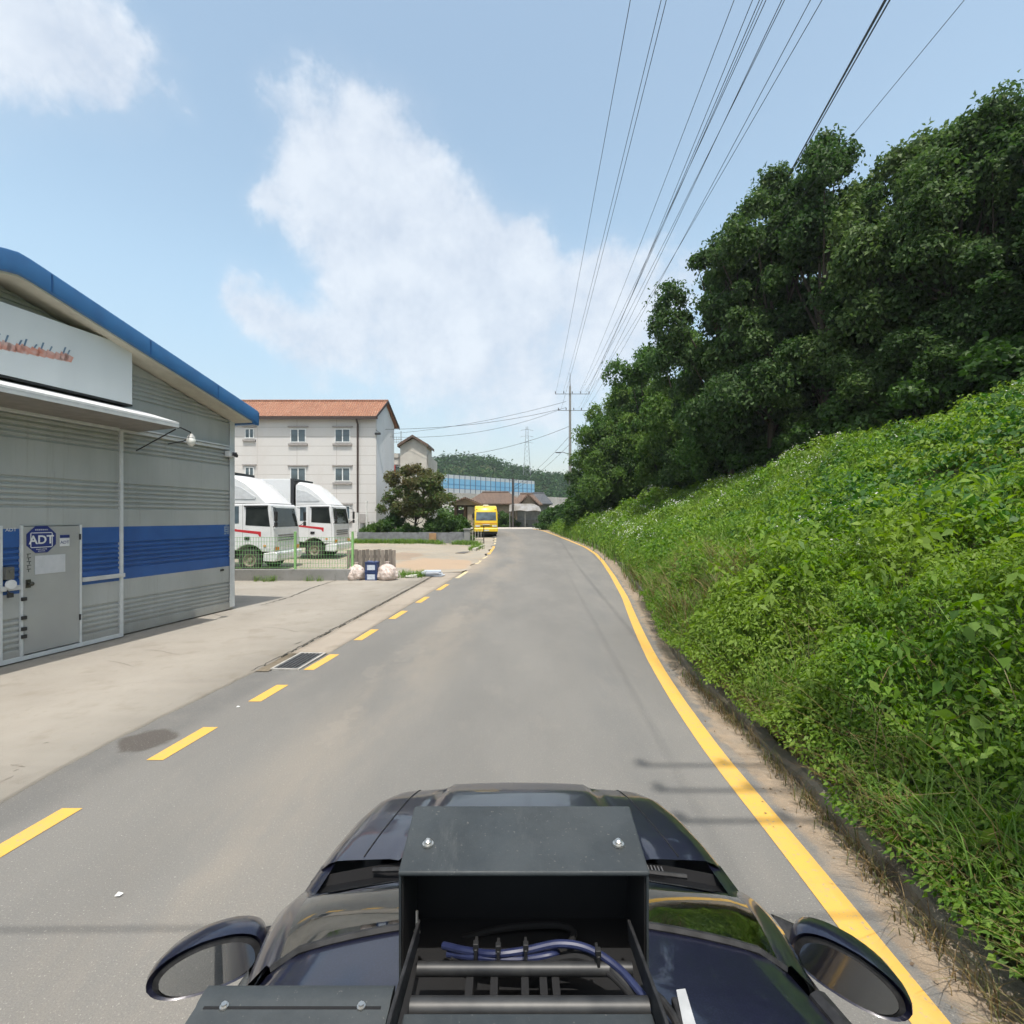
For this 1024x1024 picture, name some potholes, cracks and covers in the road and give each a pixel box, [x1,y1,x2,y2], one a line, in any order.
drain grate [270,652,326,671]
